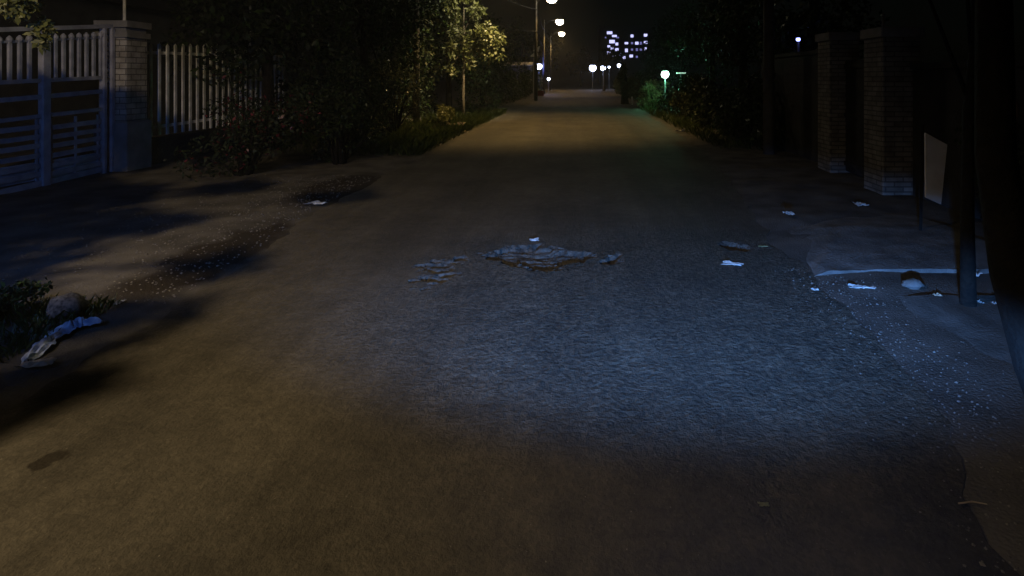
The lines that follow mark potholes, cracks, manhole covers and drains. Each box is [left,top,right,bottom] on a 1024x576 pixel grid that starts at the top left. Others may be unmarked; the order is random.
pothole [476,243,598,272]
pothole [409,255,470,291]
pothole [599,253,625,265]
